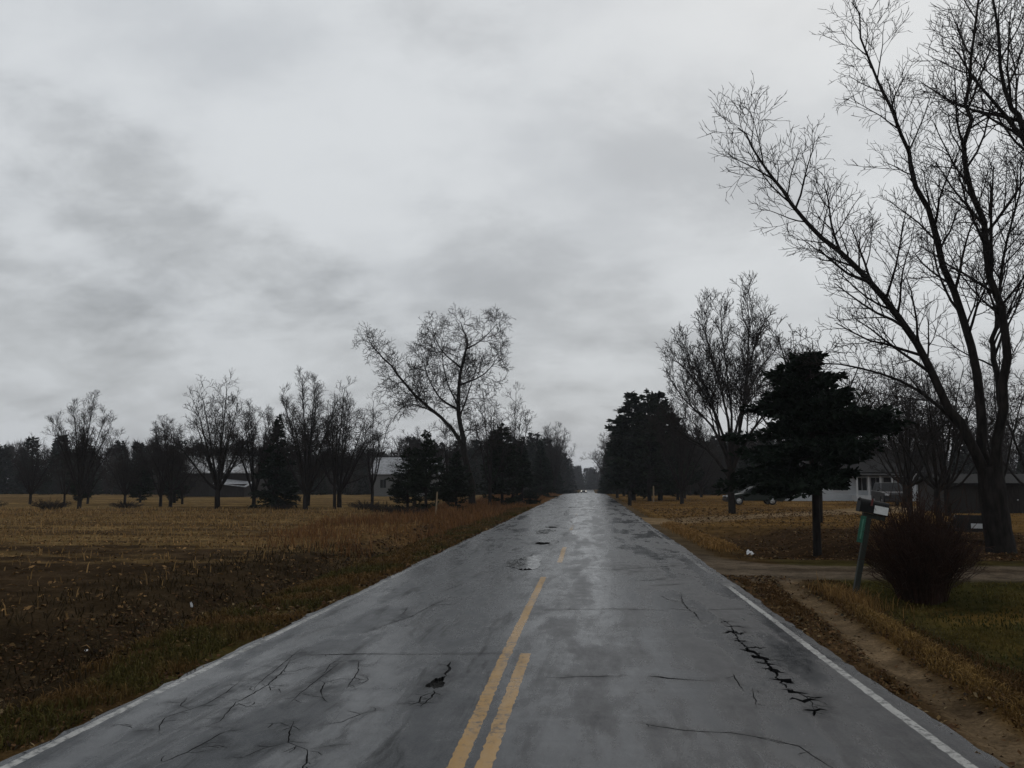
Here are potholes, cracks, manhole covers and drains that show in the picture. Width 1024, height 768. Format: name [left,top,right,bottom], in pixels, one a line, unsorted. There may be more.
crack [560,565,825,716]
crack [640,722,833,768]
crack [119,648,348,768]
pothole [425,676,445,689]
